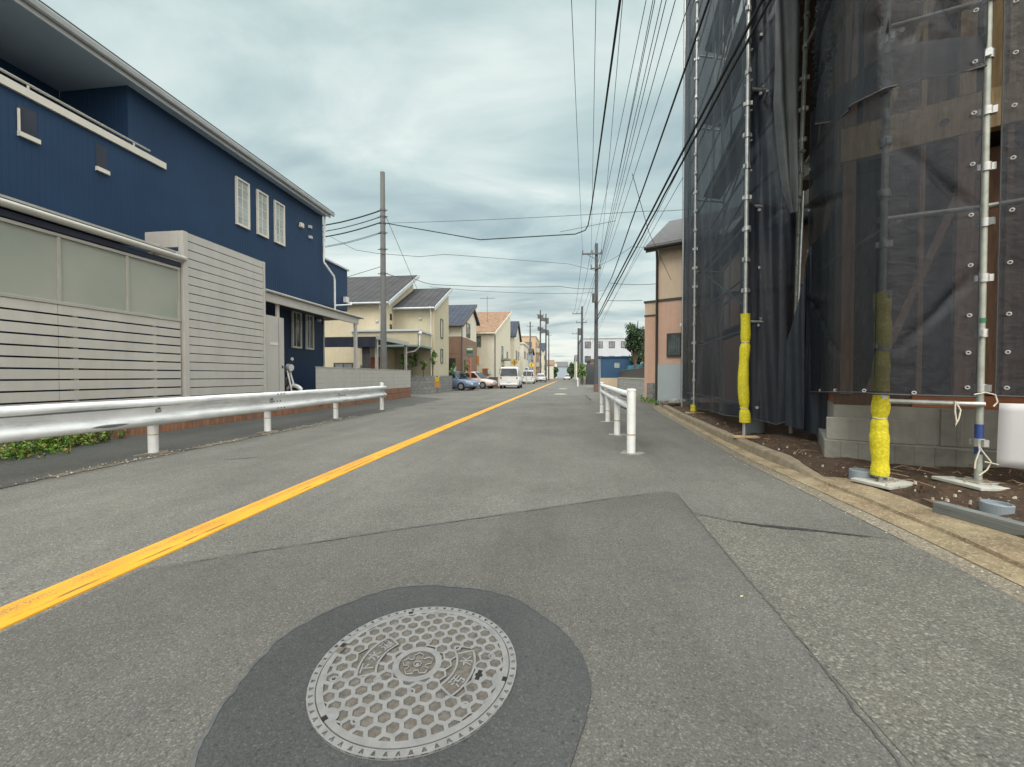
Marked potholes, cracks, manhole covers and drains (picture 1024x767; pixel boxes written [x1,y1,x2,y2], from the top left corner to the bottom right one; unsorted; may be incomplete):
crack [691,512,889,539]
manhole cover [306,607,517,761]
